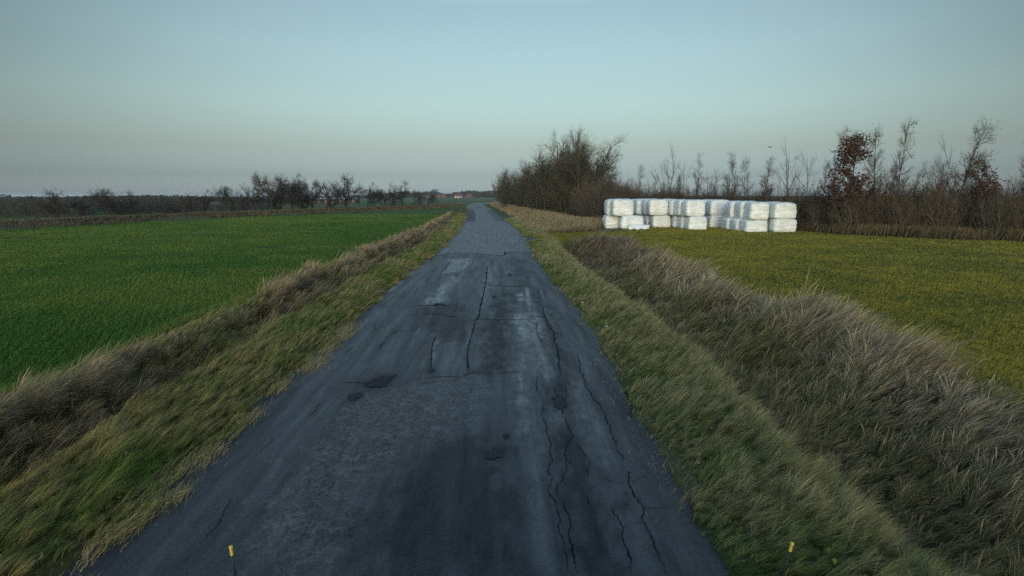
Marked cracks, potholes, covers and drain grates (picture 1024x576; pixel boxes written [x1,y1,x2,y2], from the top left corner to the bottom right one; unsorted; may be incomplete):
pothole [364,374,397,387]
crack [482,309,668,574]
pothole [552,393,567,412]
crack [373,304,513,383]
